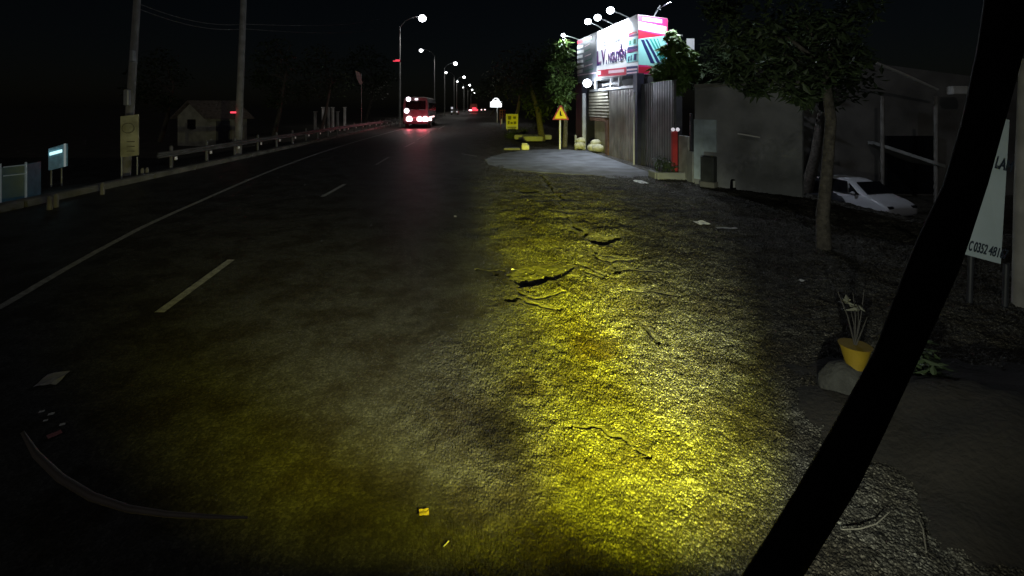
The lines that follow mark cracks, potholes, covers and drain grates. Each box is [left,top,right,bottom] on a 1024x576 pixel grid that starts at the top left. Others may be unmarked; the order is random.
crack [573,423,678,458]
pothole [583,234,625,247]
pothole [499,263,580,290]
crack [634,320,663,343]
crack [476,168,679,302]
